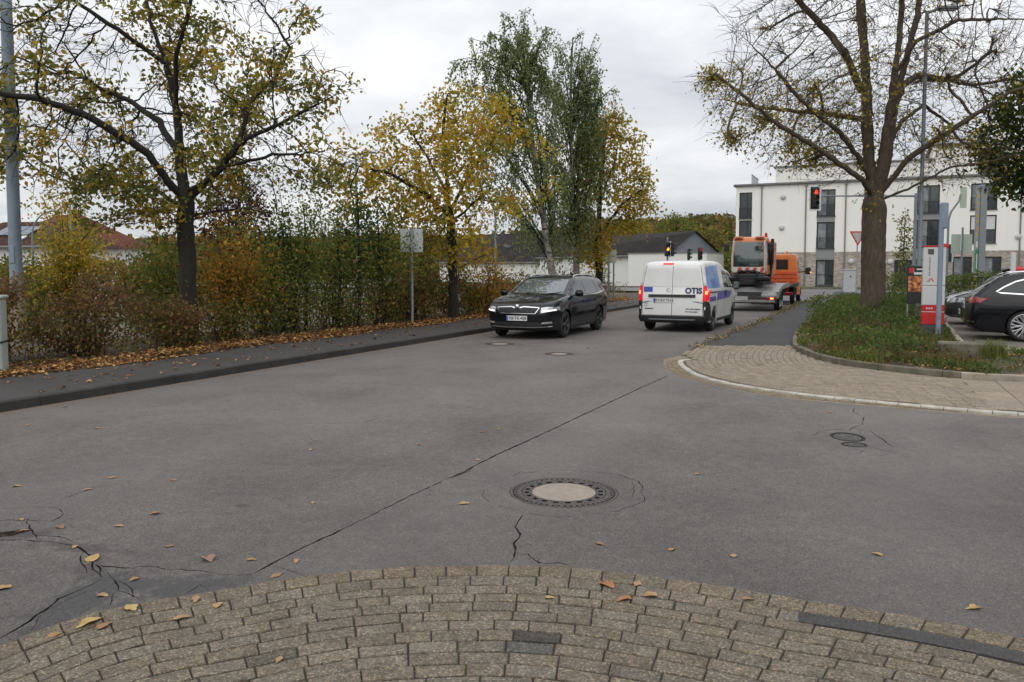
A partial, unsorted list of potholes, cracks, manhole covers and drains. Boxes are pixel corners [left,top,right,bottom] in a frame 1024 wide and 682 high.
crack [0,490,227,636]
crack [260,378,662,576]
utility cover [830,432,866,442]
manhole cover [510,478,618,508]
